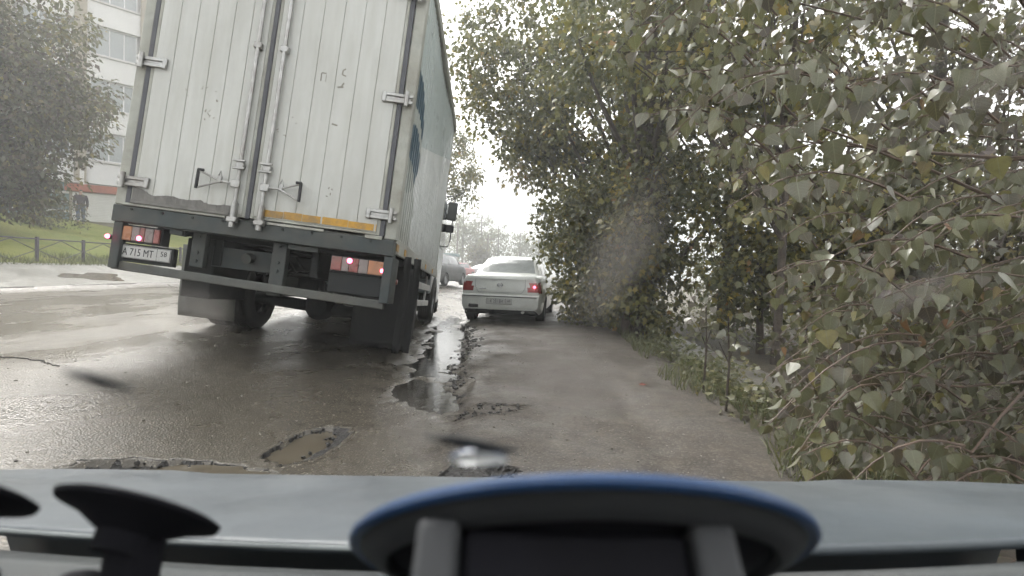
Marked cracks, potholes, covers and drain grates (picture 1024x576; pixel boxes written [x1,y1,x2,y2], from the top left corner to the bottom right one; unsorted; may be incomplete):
pothole [38,453,295,475]
pothole [433,463,532,478]
pothole [443,402,536,425]
crack [0,356,60,367]
pothole [251,423,361,469]
